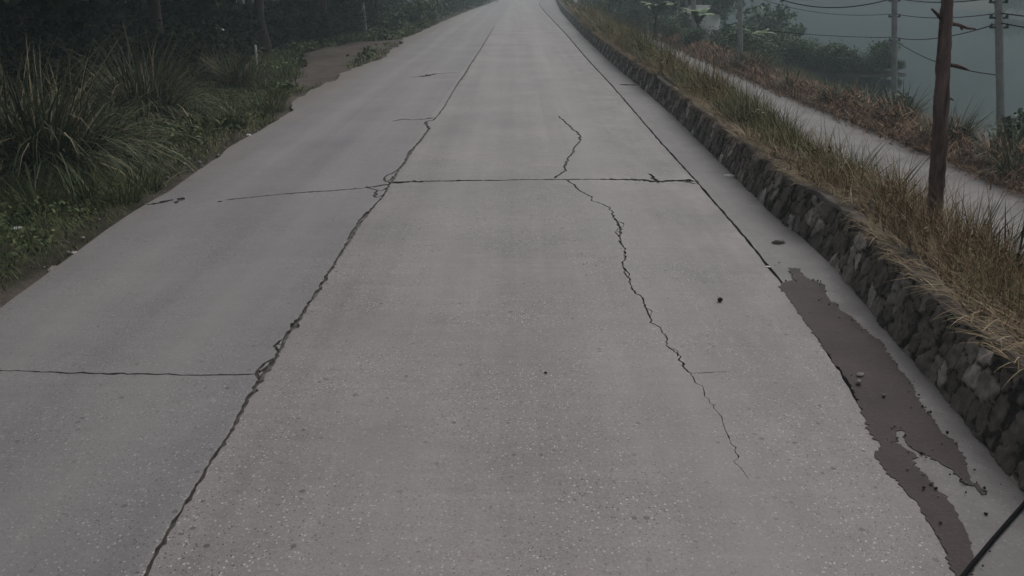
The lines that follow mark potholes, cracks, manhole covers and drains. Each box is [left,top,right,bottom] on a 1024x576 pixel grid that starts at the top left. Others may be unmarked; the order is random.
crack [0,26,748,576]
